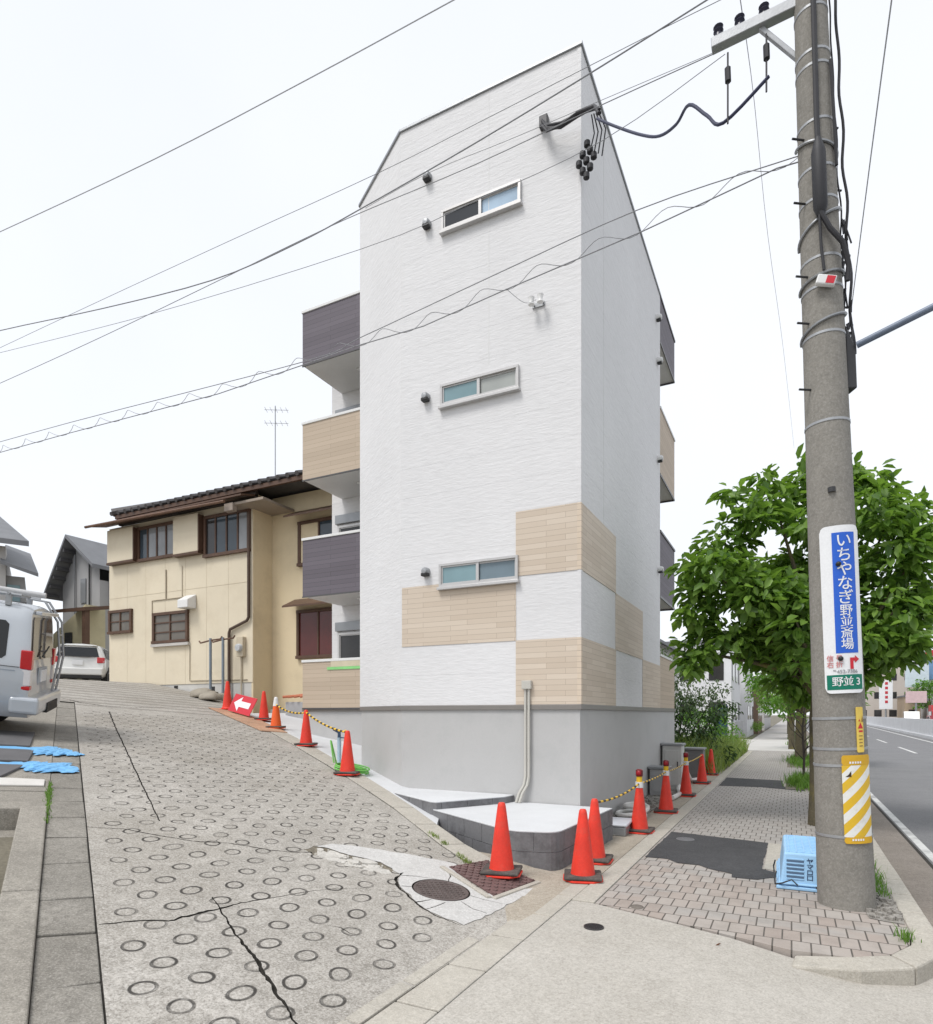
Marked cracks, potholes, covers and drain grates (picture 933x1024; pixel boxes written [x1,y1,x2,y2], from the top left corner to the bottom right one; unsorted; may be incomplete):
crack [63,698,312,853]
manhole cover [584,923,604,931]
manhole cover [413,880,469,901]
crack [99,888,336,1024]
